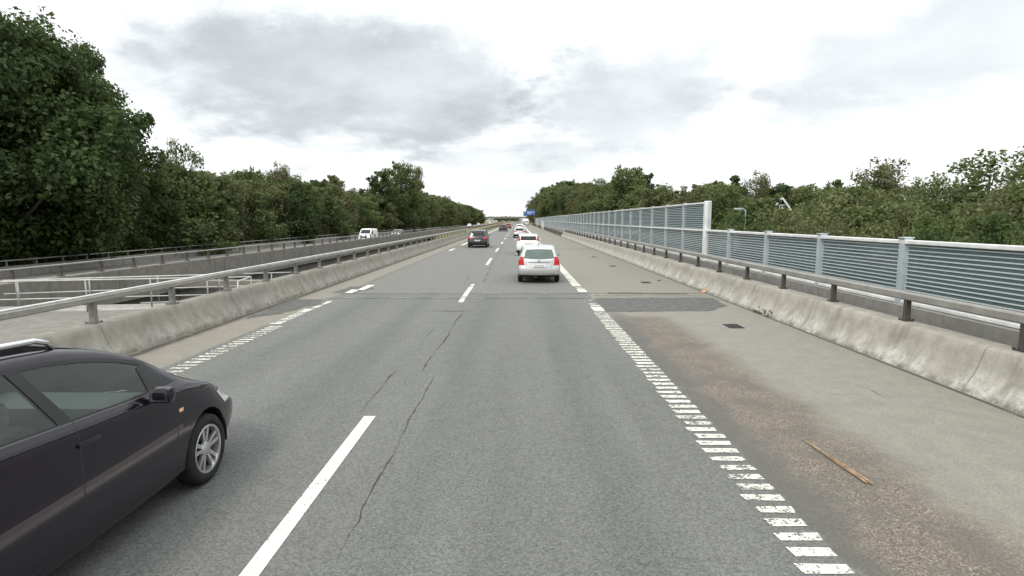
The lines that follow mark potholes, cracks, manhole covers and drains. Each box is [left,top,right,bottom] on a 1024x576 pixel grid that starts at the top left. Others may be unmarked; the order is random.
crack [336,310,462,562]
